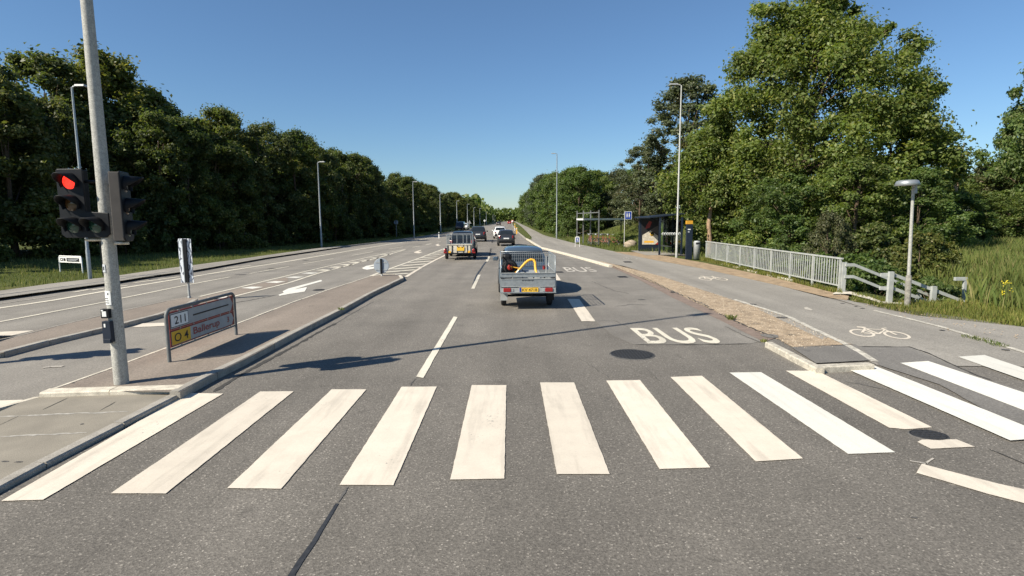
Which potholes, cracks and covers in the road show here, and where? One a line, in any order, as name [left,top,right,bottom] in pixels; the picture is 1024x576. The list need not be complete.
manhole cover [907,429,950,440]
manhole cover [609,349,655,360]
